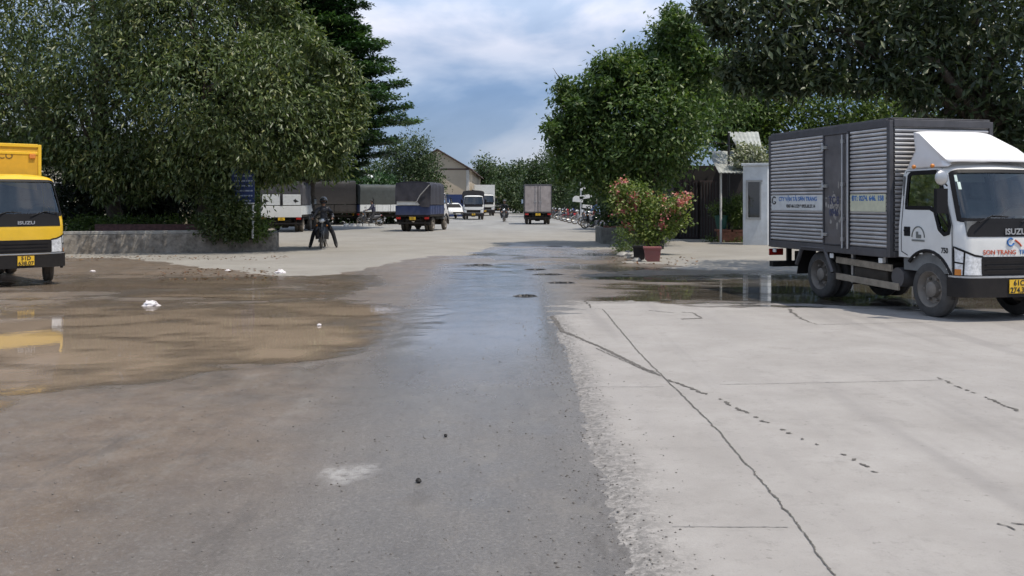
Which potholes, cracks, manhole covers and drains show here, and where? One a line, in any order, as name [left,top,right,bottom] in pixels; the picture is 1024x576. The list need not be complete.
crack [939,378,1019,411]
crack [551,301,875,576]
